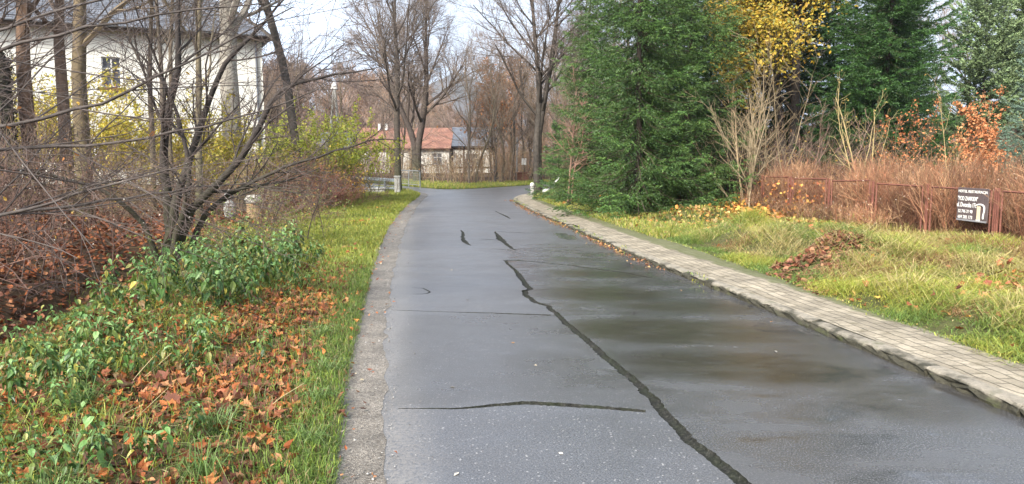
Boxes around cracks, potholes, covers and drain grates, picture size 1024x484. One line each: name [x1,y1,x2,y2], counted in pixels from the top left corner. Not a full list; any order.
crack [461,211,521,250]
